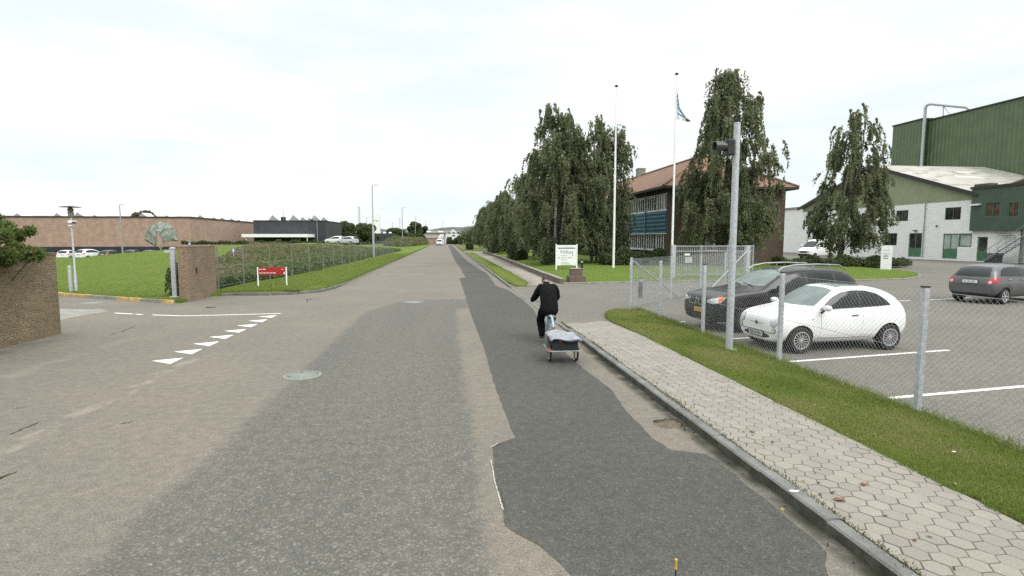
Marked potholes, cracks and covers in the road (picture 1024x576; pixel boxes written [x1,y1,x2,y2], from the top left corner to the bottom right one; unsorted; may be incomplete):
pothole [653,418,685,429]
manhole cover [283,371,322,380]
